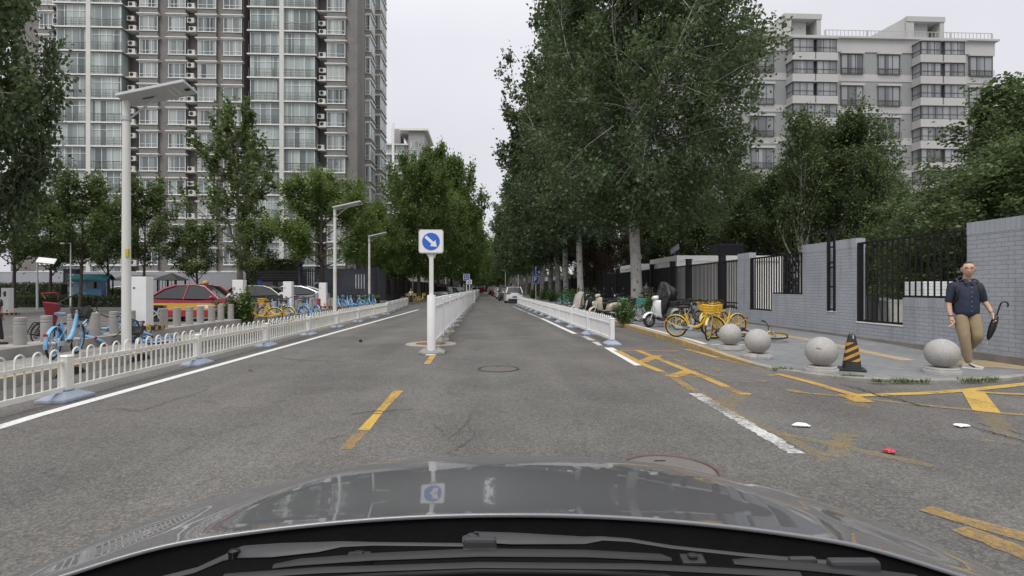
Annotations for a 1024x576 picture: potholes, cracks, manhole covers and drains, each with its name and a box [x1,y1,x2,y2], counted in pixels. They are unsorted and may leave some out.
crack [97,389,207,412]
manhole cover [622,454,725,477]
crack [972,423,1024,441]
crack [433,415,476,453]
